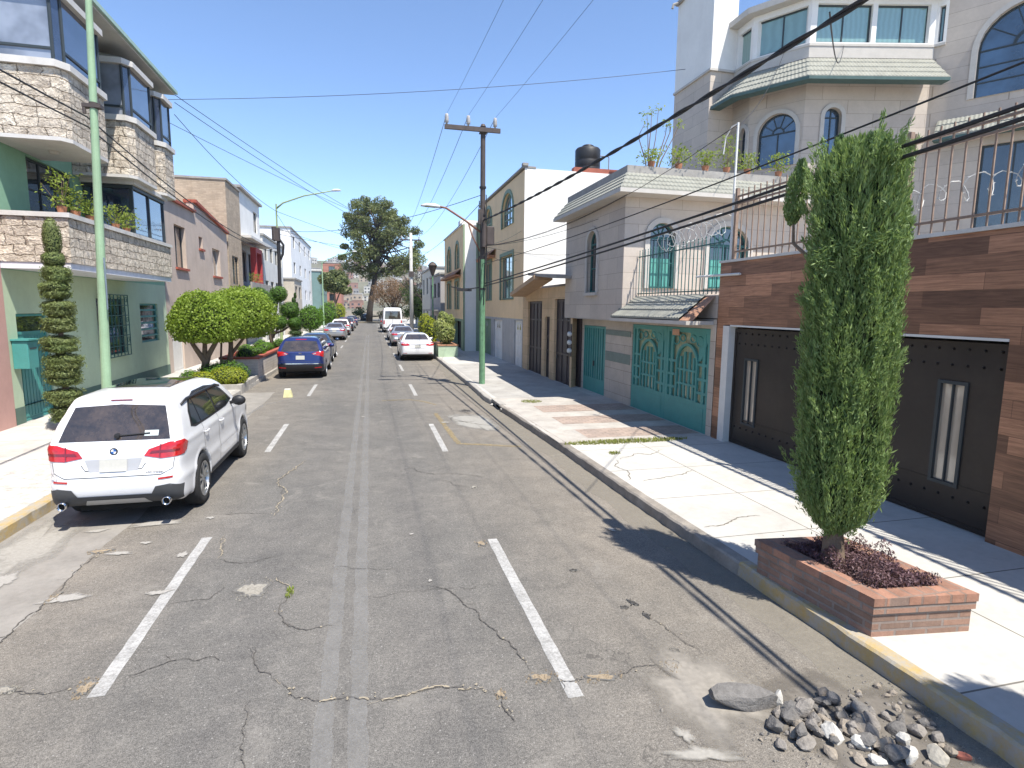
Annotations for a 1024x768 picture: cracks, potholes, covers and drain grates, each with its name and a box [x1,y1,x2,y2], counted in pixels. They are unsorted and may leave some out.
crack [271,461,304,515]
crack [239,700,250,768]
crack [424,584,531,671]
crack [249,646,515,722]
crack [1,684,79,694]
crack [123,655,221,678]
